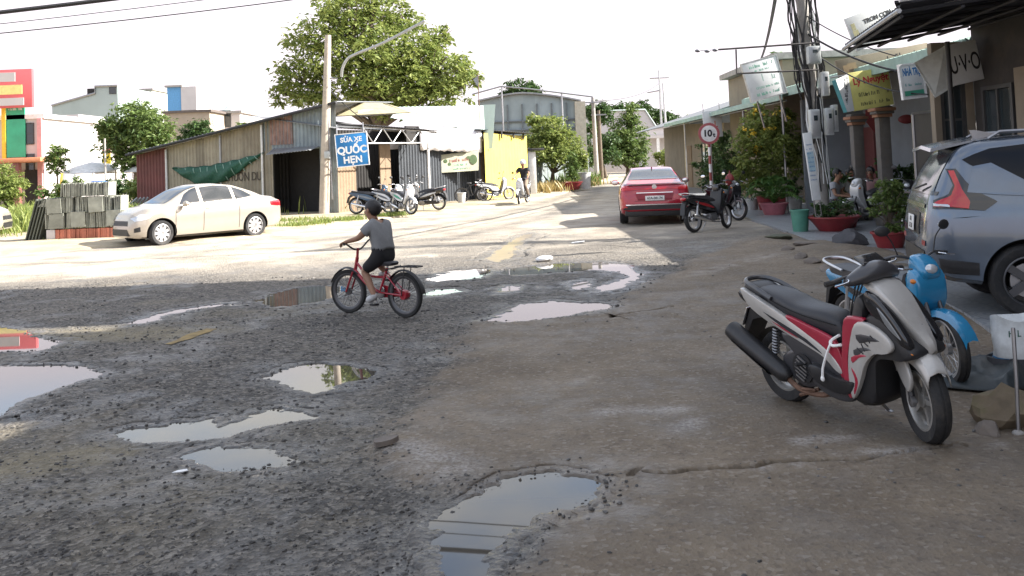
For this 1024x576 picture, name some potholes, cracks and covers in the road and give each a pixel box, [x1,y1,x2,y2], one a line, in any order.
pothole [158,441,318,478]
pothole [473,298,624,323]
pothole [419,268,505,284]
pothole [404,465,621,576]
pothole [99,404,335,448]
pothole [0,323,83,354]
pothole [488,260,654,294]
crack [625,439,986,489]
pothole [244,360,394,398]
pothole [111,300,254,327]
pothole [240,285,360,310]
pothole [0,361,123,420]
